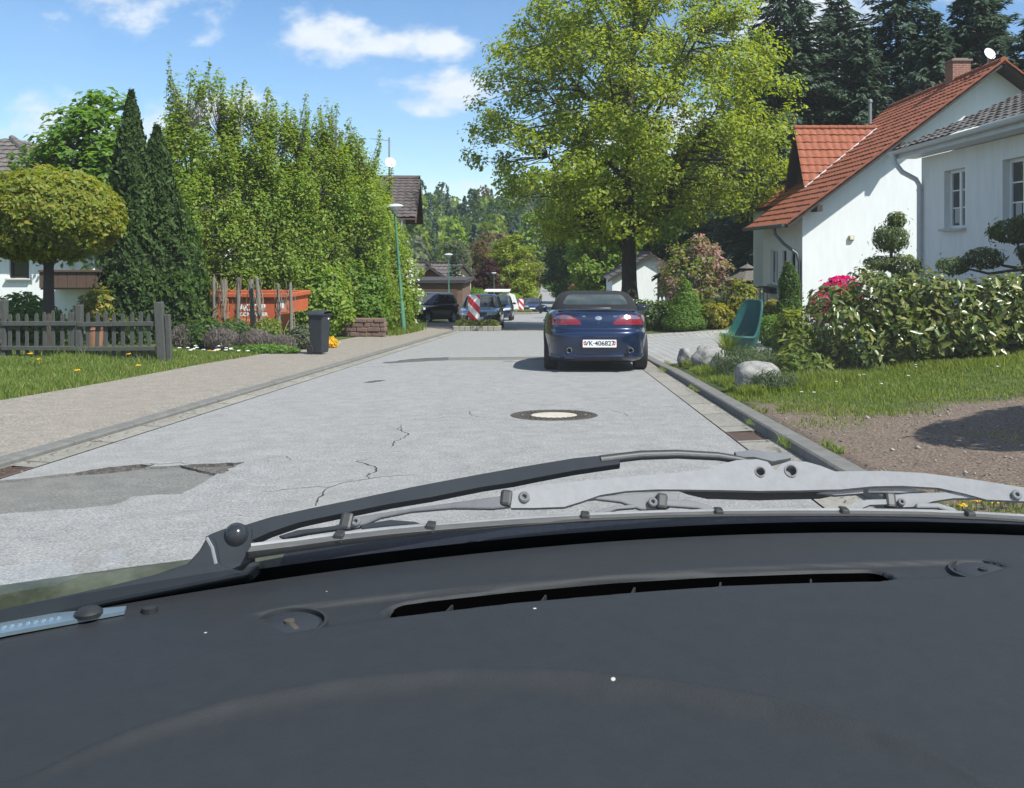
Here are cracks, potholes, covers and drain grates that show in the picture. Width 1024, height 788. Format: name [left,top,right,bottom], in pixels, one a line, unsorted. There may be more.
crack [265,425,419,506]
manhole cover [510,410,598,421]
drain grate [726,432,768,445]
